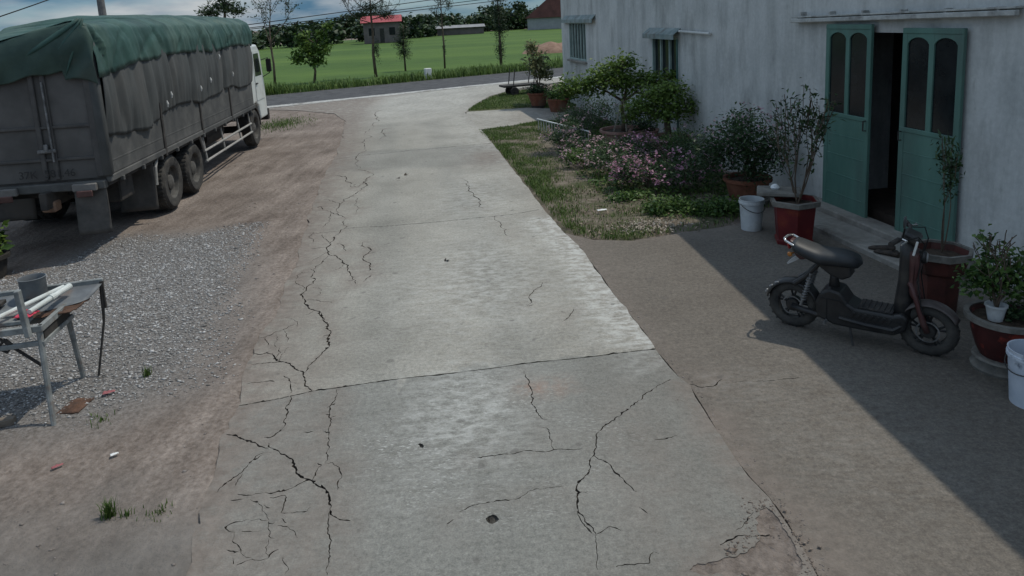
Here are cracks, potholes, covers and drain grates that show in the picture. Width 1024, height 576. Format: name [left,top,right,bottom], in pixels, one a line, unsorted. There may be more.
crack [447,374,669,567]
crack [218,269,350,575]
crack [311,114,385,283]
